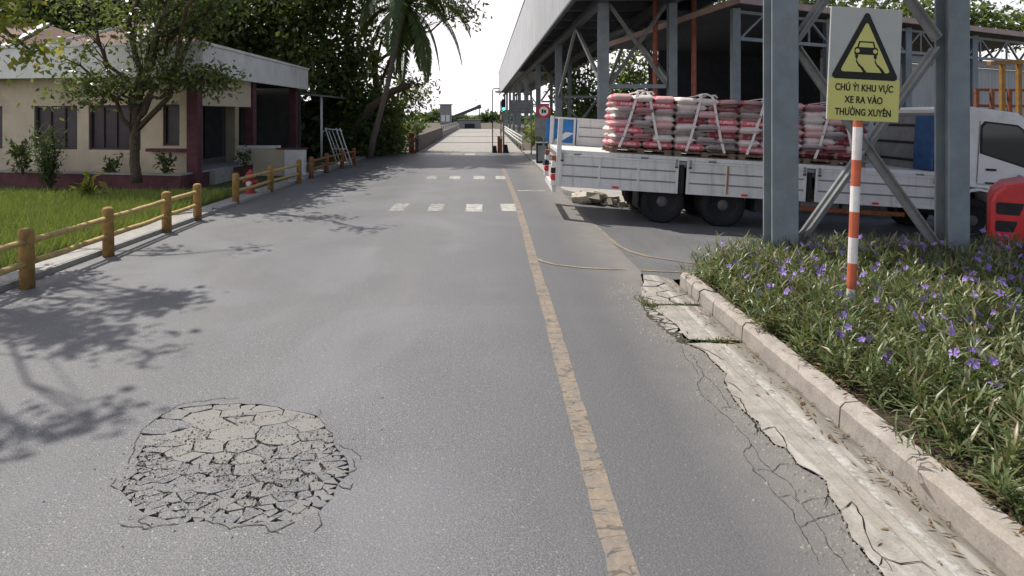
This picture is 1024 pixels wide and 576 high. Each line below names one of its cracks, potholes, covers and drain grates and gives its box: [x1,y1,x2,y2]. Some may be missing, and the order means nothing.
crack [103,397,361,534]
crack [641,275,935,576]
